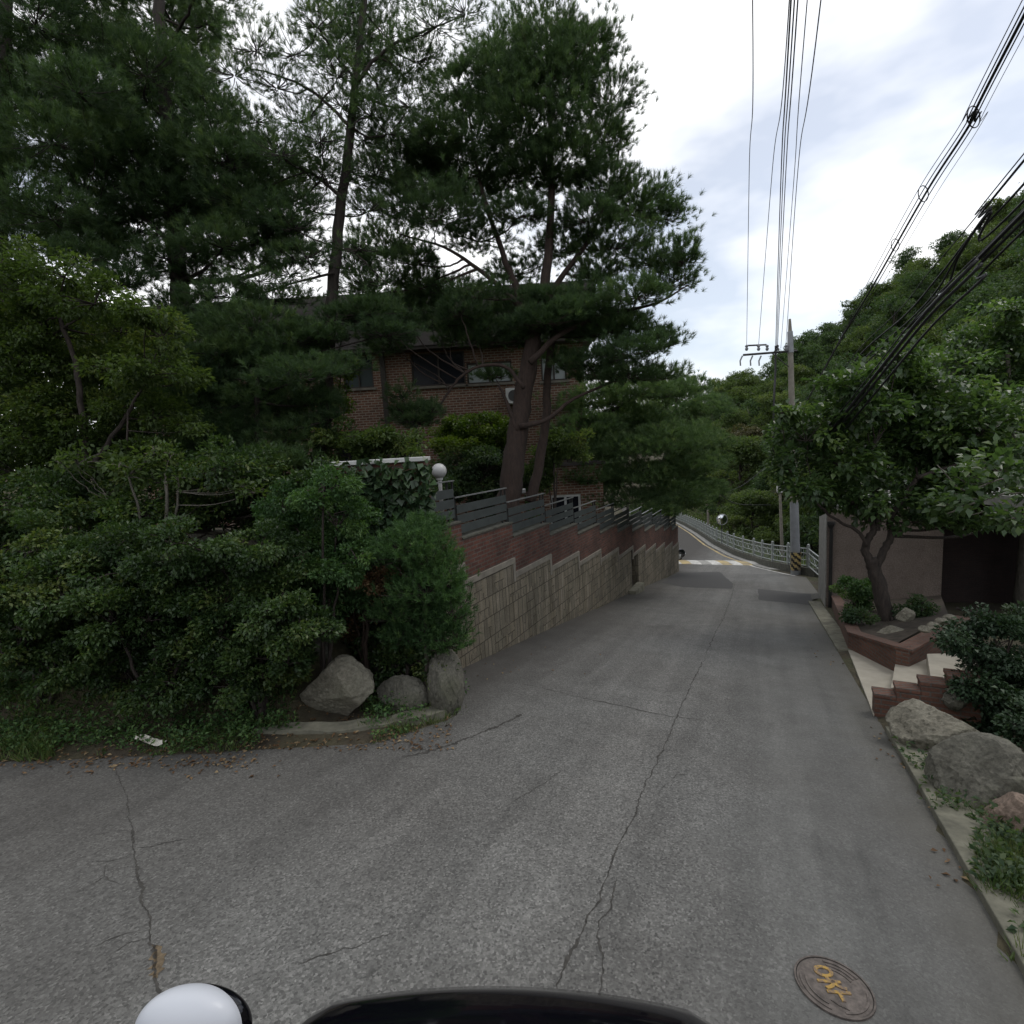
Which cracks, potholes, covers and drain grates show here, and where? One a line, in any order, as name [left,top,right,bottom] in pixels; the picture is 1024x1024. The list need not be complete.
crack [303,933,392,963]
crack [91,771,186,994]
manhole cover [794,955,876,1022]
crack [522,588,734,993]
